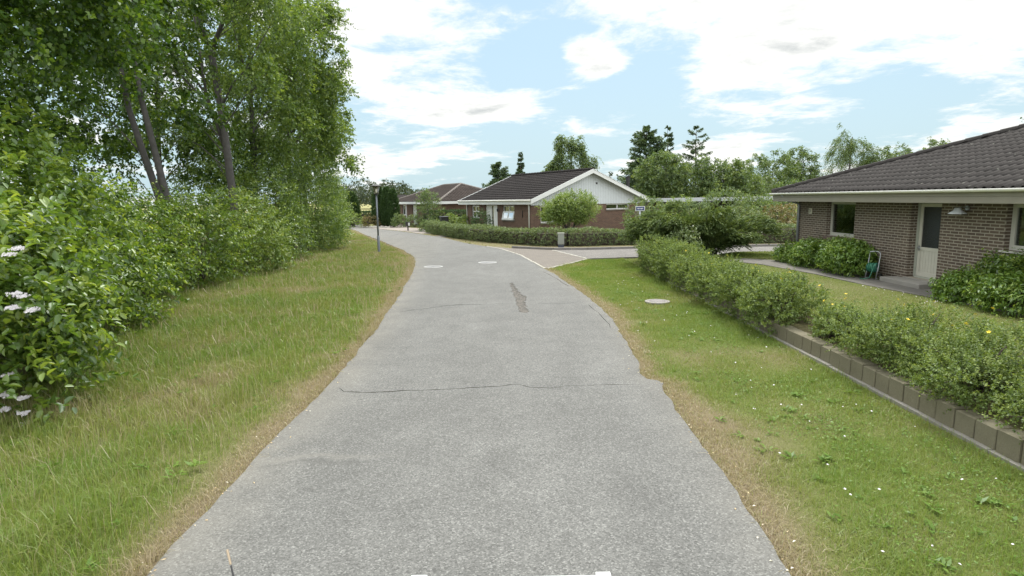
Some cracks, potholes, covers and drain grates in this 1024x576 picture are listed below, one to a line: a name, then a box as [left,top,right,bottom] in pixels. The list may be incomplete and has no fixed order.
crack [341,384,631,393]
